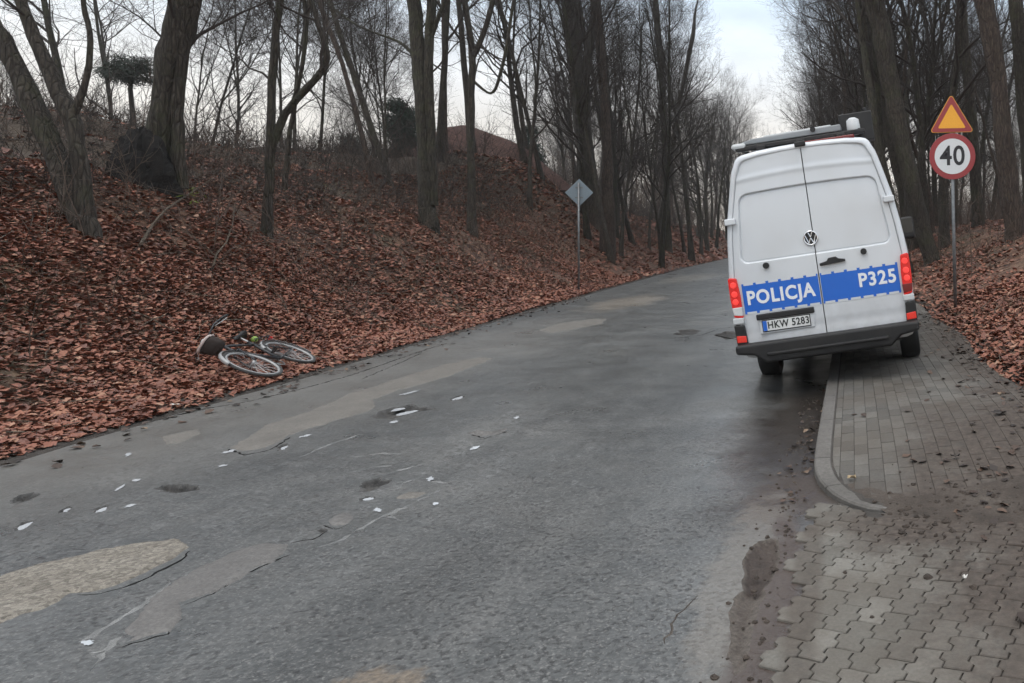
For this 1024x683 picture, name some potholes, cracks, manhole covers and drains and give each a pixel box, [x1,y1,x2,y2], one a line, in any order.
pothole [154,484,200,493]
pothole [359,477,393,492]
crack [78,433,447,671]
pothole [714,331,736,340]
pothole [727,538,780,675]
crack [663,598,695,644]
pothole [369,404,436,419]
pothole [10,492,40,504]
